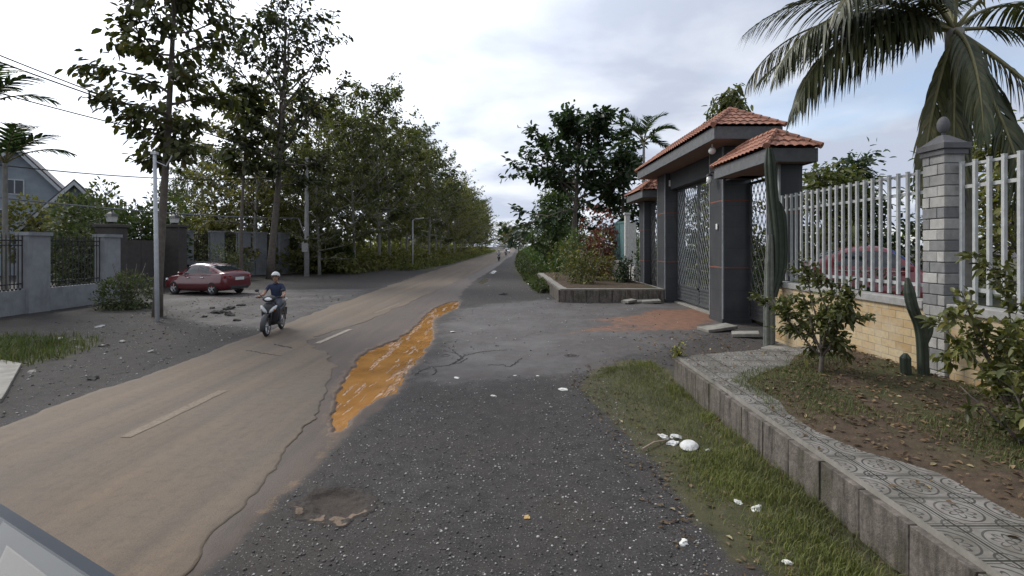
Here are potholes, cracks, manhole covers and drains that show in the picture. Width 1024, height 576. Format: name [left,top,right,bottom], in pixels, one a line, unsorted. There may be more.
pothole [286,485,380,529]
crack [414,345,522,376]
crack [246,344,292,356]
